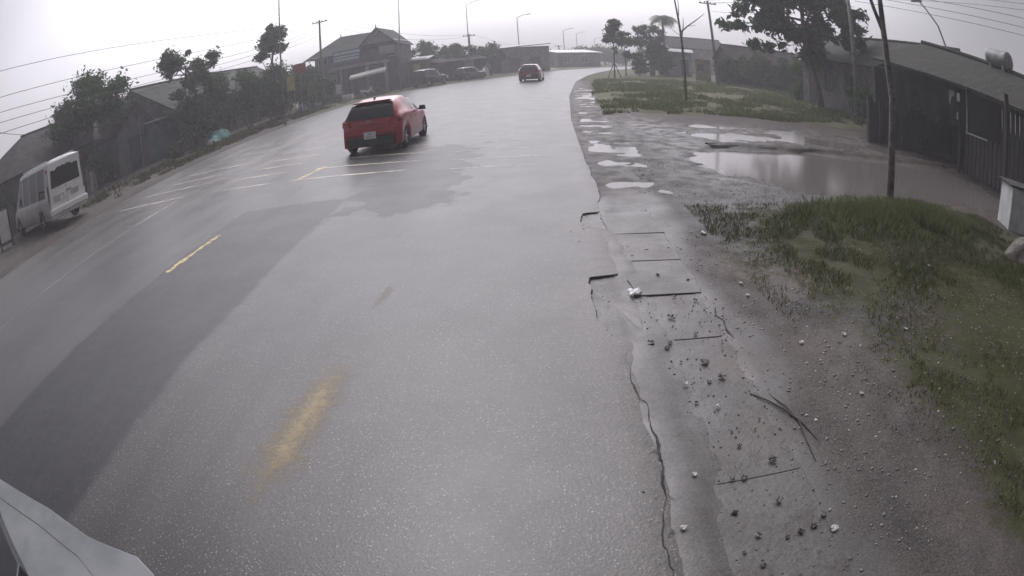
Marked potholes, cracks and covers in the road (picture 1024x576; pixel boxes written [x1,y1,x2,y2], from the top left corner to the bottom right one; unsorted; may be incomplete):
crack [625,352,678,576]
